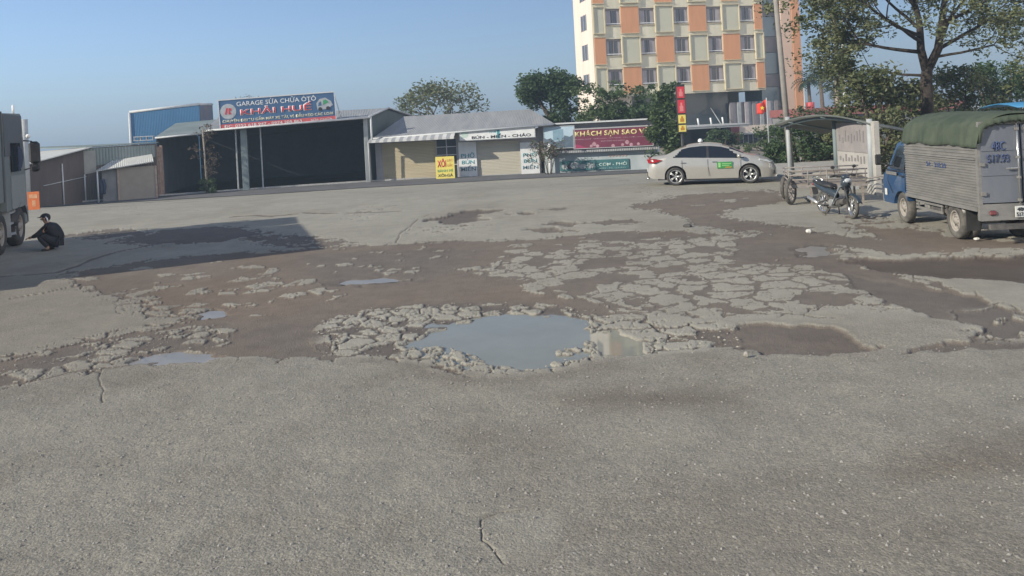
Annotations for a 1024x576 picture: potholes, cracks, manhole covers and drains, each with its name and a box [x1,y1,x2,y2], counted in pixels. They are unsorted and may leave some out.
pothole [299,299,746,382]
crack [0,209,958,405]
pothole [326,274,427,288]
pothole [715,320,894,358]
pothole [412,207,512,225]
crack [474,506,530,568]
pothole [112,348,232,369]
